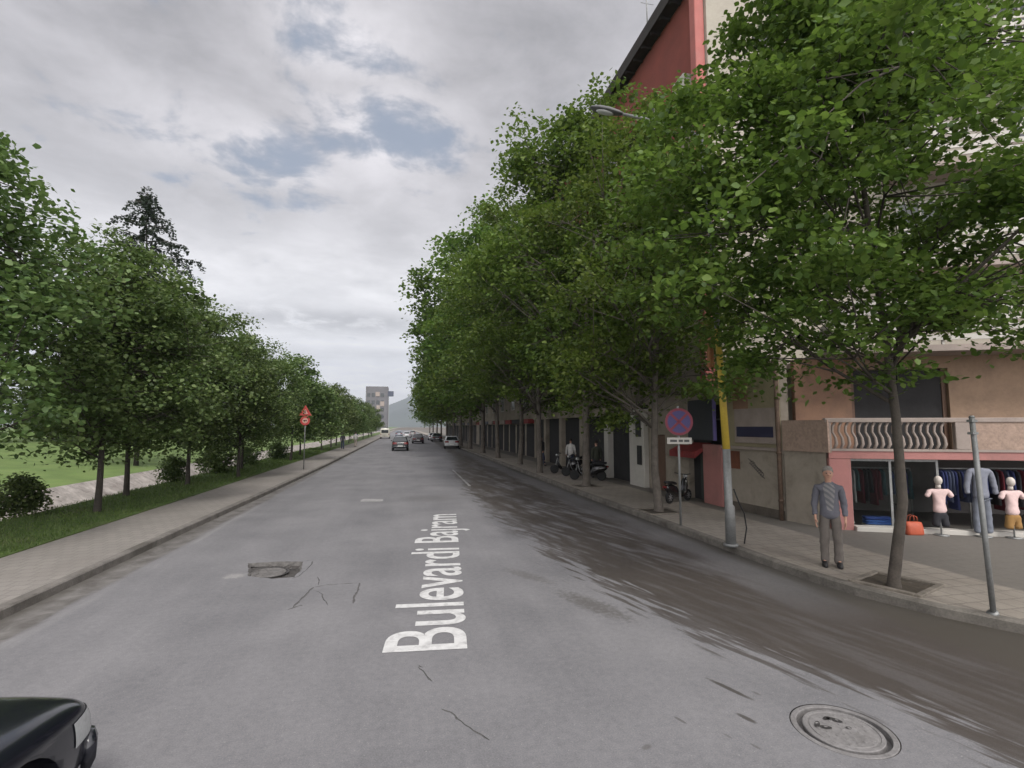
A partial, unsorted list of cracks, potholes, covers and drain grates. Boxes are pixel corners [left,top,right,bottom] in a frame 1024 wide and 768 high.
manhole cover [790,705,901,760]
crack [288,561,360,610]
pothole [248,561,303,579]
crack [442,709,489,740]
